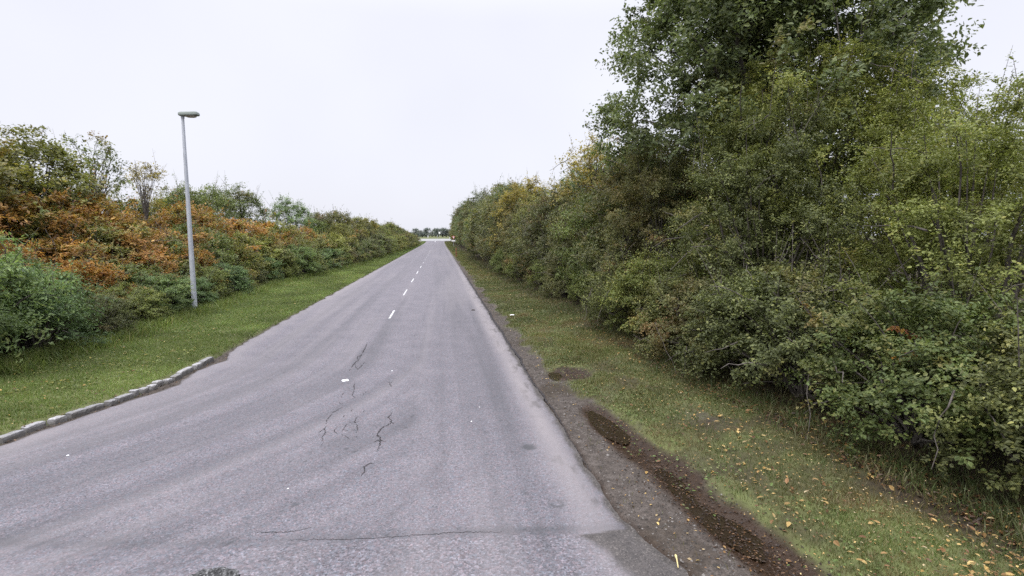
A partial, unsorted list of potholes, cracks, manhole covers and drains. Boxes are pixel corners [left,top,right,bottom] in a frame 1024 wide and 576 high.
crack [320,345,394,474]
pothole [189,567,239,576]
